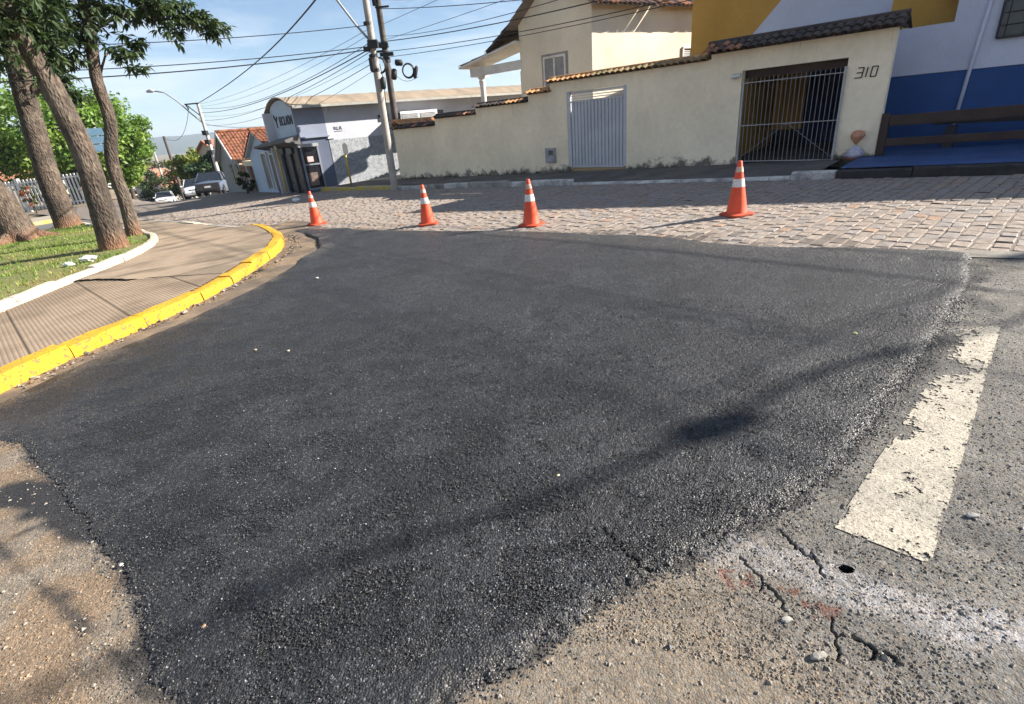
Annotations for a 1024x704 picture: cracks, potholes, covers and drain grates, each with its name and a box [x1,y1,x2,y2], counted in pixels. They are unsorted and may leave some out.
crack [830,625,897,665]
crack [780,532,824,578]
pothole [833,564,857,576]
crack [743,561,784,610]
